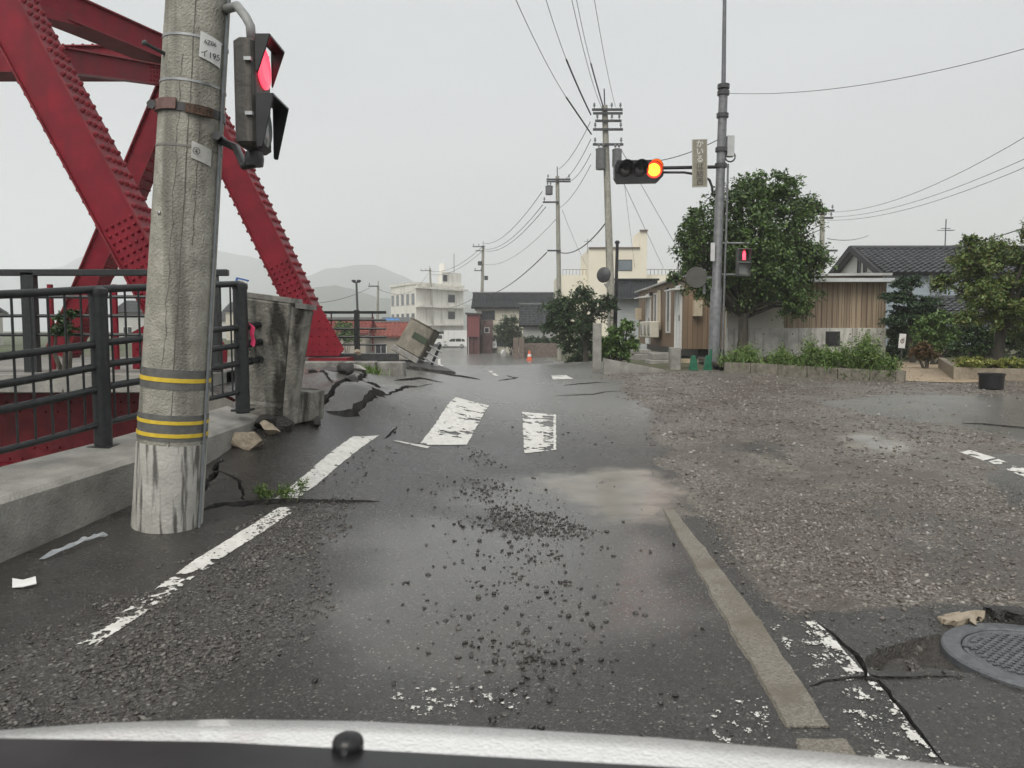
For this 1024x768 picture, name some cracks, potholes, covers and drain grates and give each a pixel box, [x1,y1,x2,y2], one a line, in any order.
manhole cover [940,623,1024,690]
crack [204,459,379,511]
pothole [863,634,974,676]
crack [306,370,481,450]
crack [809,621,968,763]
crack [557,382,623,396]
